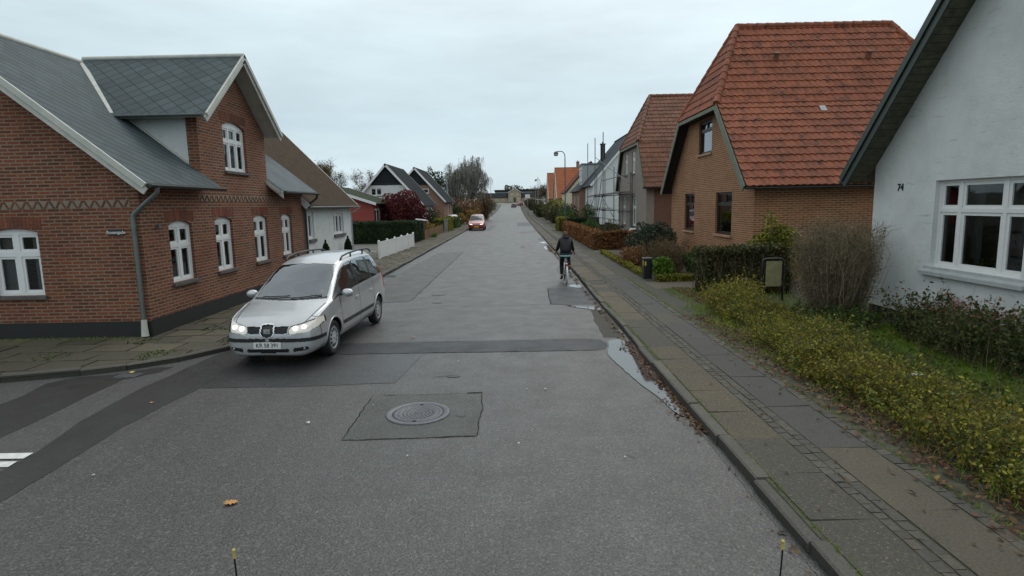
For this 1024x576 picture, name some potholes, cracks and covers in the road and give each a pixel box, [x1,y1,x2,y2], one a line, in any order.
manhole cover [386,402,450,425]
